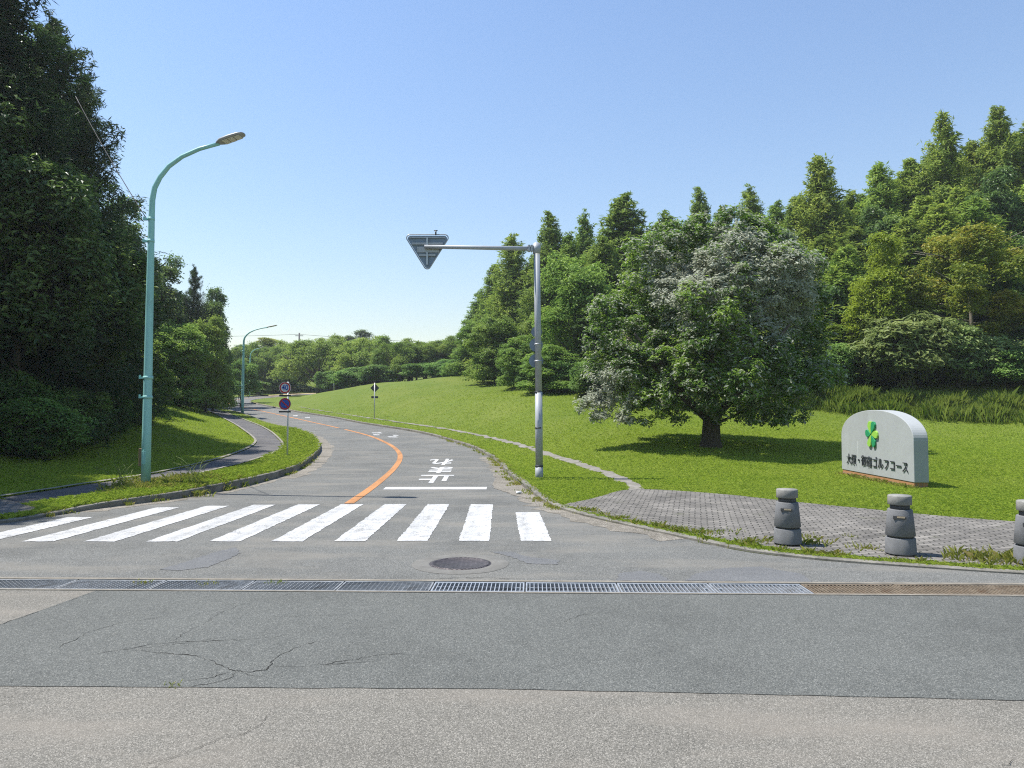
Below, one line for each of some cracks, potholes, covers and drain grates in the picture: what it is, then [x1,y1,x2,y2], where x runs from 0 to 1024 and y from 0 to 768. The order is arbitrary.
drain grate [893,584,1011,595]
drain grate [150,580,255,590]
drain grate [708,583,814,594]
drain grate [526,582,620,592]
crack [102,606,401,687]
drain grate [242,581,344,590]
drain grate [987,585,1024,595]
drain grate [0,579,78,589]
drain grate [335,581,434,591]
drain grate [801,584,911,594]
drain grate [431,582,525,592]
drain grate [56,580,166,589]
